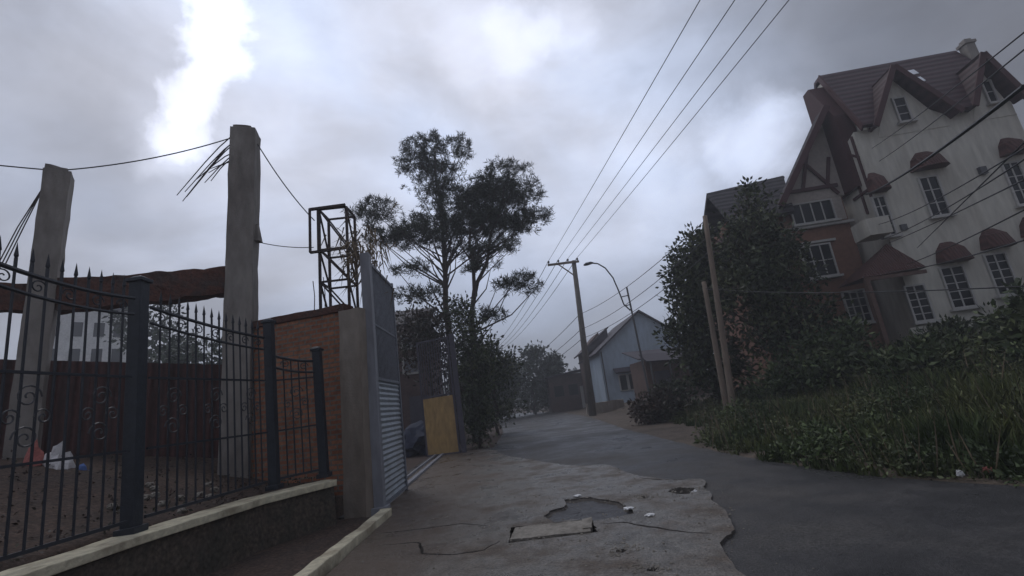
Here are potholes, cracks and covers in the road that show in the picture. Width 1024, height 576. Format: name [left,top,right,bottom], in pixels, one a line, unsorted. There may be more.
crack [378,541,500,555]
pothole [546,497,634,523]
crack [603,522,712,534]
